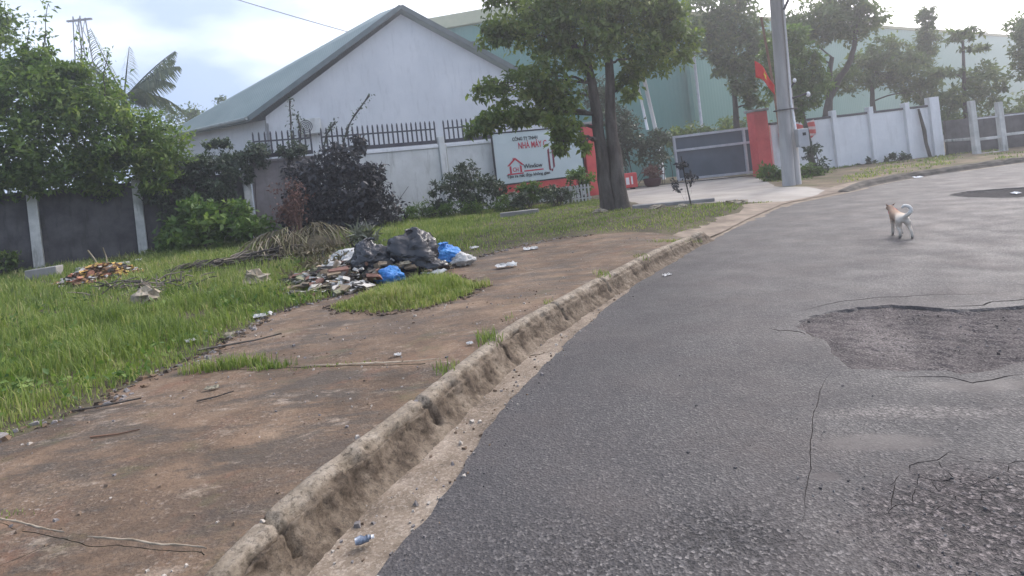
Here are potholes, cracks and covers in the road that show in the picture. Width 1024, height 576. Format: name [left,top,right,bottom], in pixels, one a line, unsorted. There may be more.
pothole [796,304,1024,375]
crack [888,451,1024,514]
crack [893,374,1022,383]
crack [800,294,1024,311]
